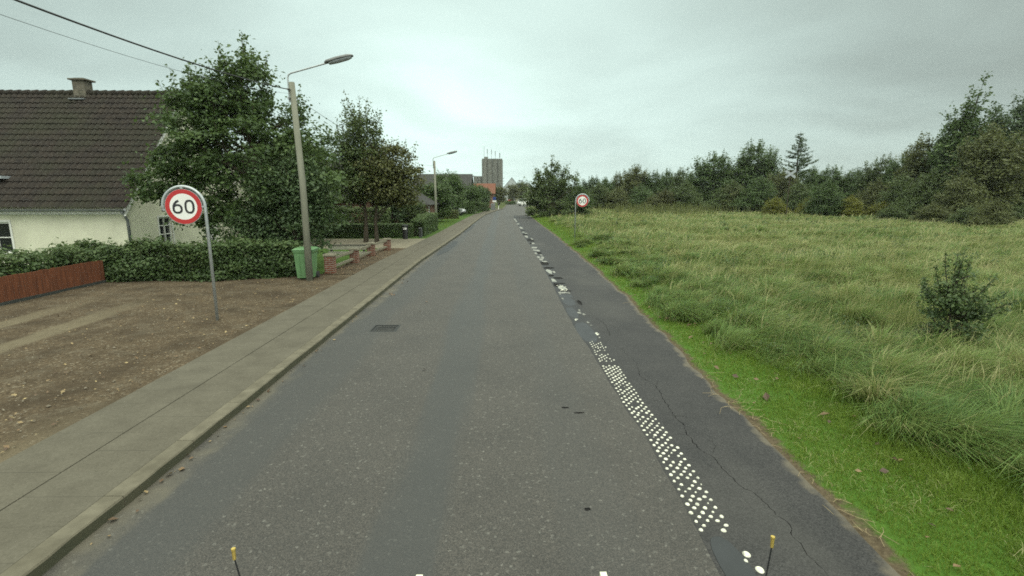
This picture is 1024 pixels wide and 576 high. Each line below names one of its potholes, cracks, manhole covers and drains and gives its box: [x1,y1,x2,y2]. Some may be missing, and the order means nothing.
crack [624,351,825,571]
